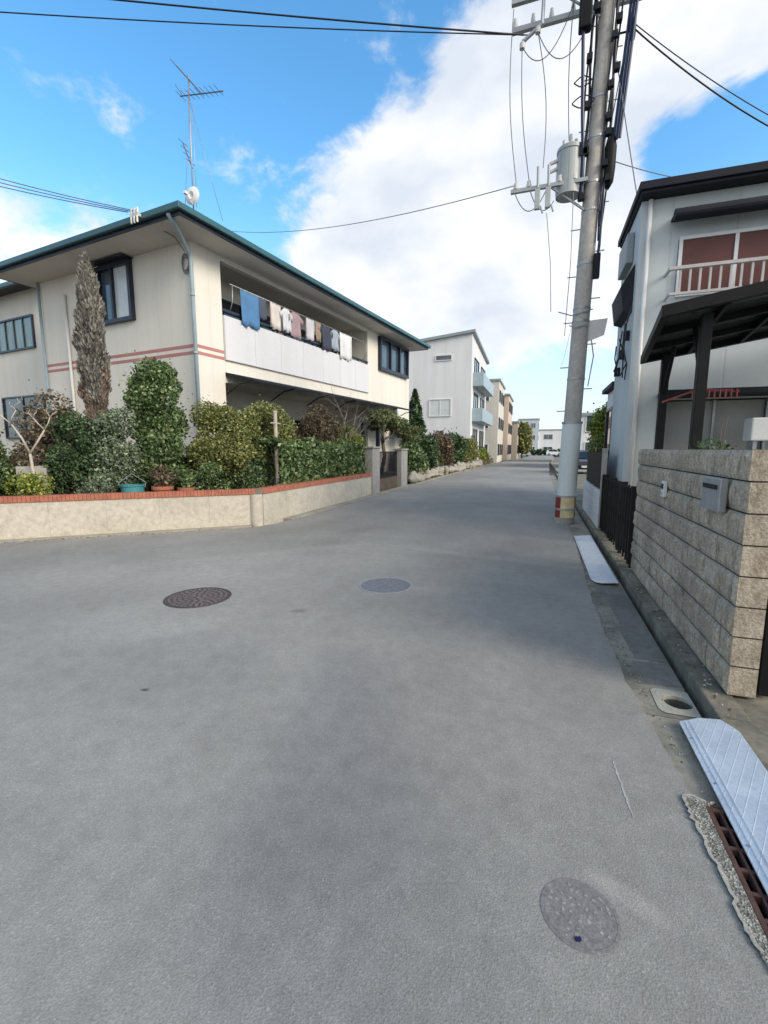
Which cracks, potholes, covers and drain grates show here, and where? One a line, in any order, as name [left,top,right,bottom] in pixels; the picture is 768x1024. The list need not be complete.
manhole cover [359,577,412,594]
drain grate [706,806,768,939]
manhole cover [163,587,232,608]
crack [612,759,633,816]
drain grate [626,682,702,720]
manhole cover [540,878,622,955]
